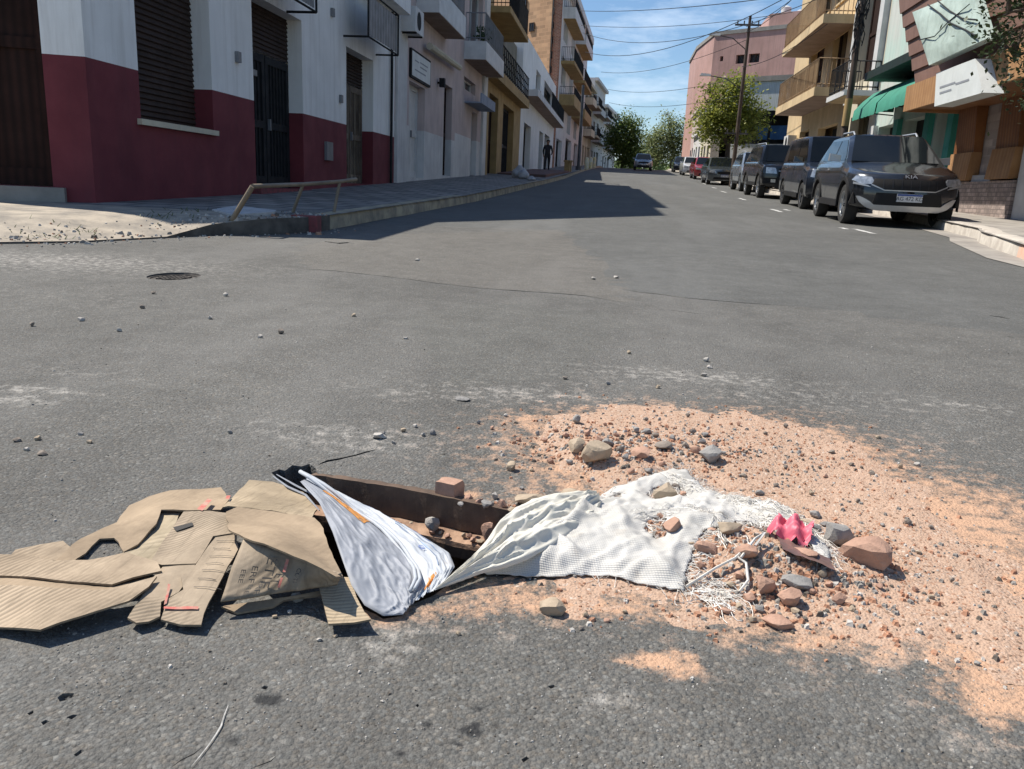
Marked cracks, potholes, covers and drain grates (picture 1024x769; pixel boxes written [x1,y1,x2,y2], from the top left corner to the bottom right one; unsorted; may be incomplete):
pothole [272,464,476,619]
crack [320,450,373,464]
manhole cover [147,272,201,280]
crack [311,269,625,303]
crack [628,290,785,306]
